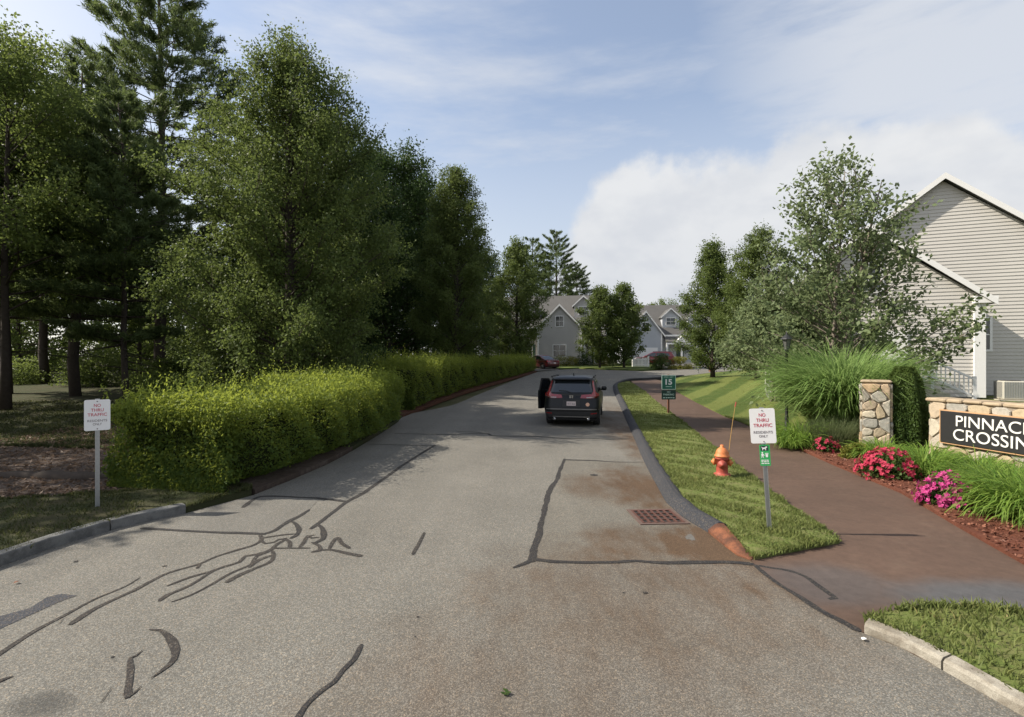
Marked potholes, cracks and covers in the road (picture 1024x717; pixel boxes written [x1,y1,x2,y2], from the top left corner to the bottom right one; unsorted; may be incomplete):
drain grate [626,509,690,525]
